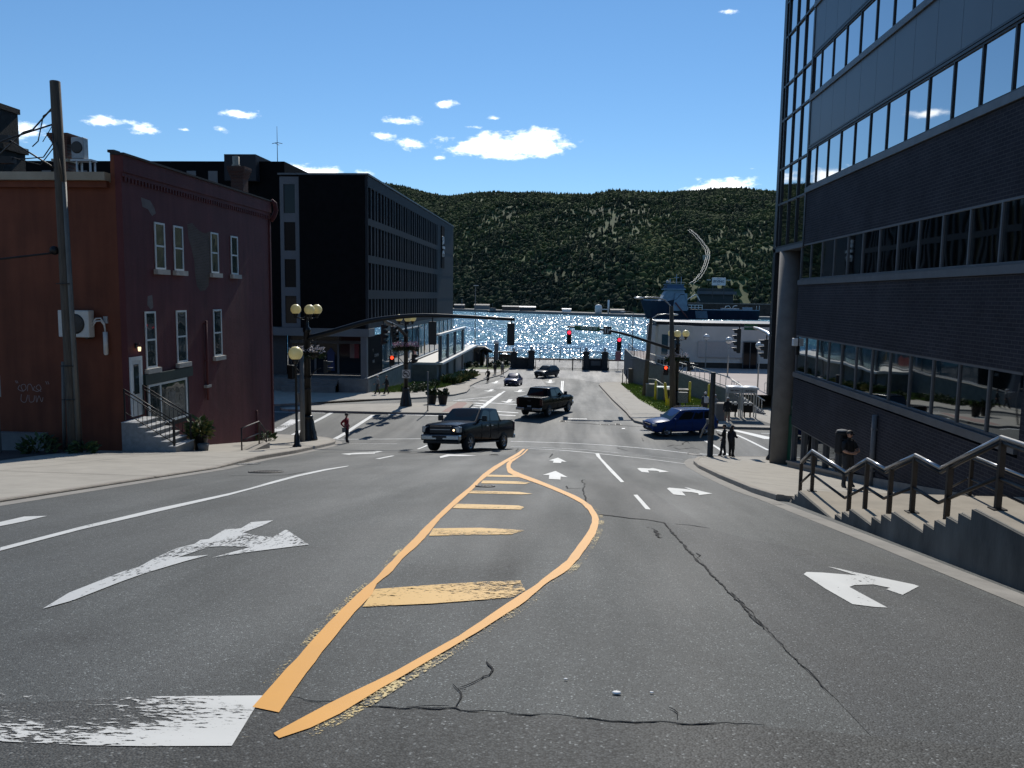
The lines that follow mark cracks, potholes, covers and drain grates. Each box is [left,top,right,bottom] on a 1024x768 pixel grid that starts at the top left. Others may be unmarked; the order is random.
crack [291,660,761,725]
